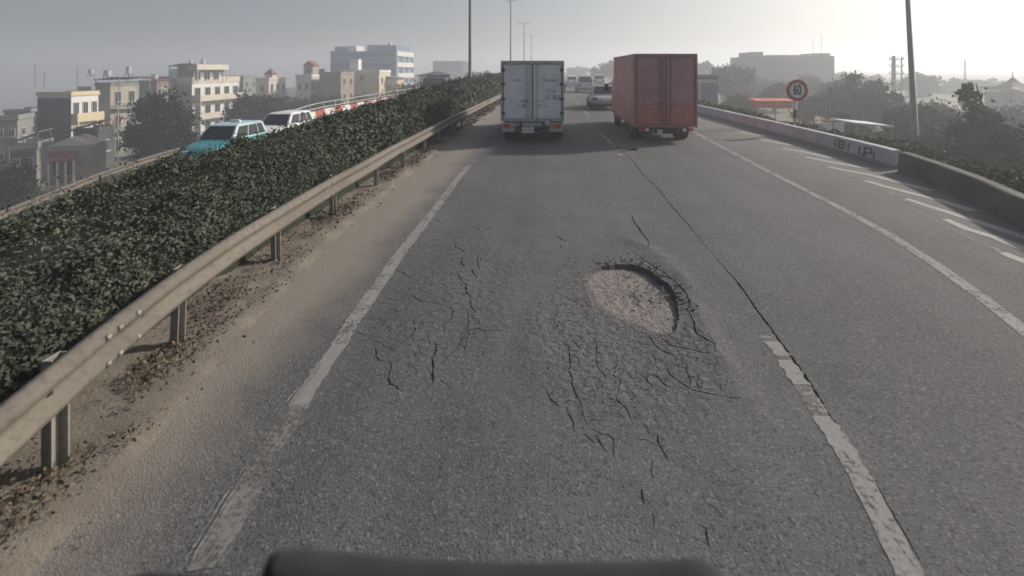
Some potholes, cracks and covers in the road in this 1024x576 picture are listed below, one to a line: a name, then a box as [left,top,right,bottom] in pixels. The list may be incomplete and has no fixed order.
crack [698,503,720,550]
crack [356,224,504,391]
pothole [569,252,703,348]
crack [546,215,742,529]
